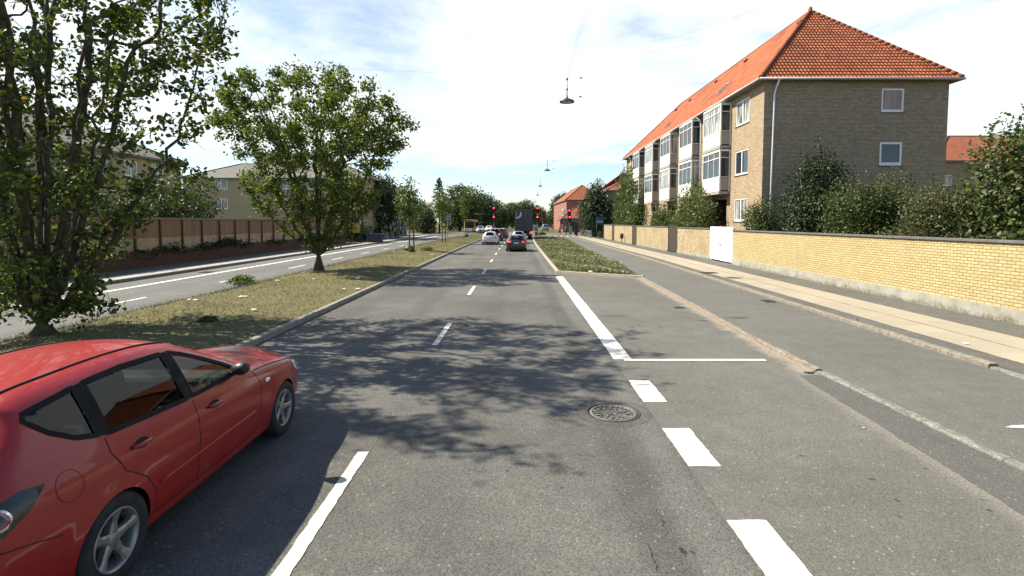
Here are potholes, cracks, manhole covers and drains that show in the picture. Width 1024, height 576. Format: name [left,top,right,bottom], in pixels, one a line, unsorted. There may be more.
crack [645,510,676,572]
manhole cover [586,403,641,423]
